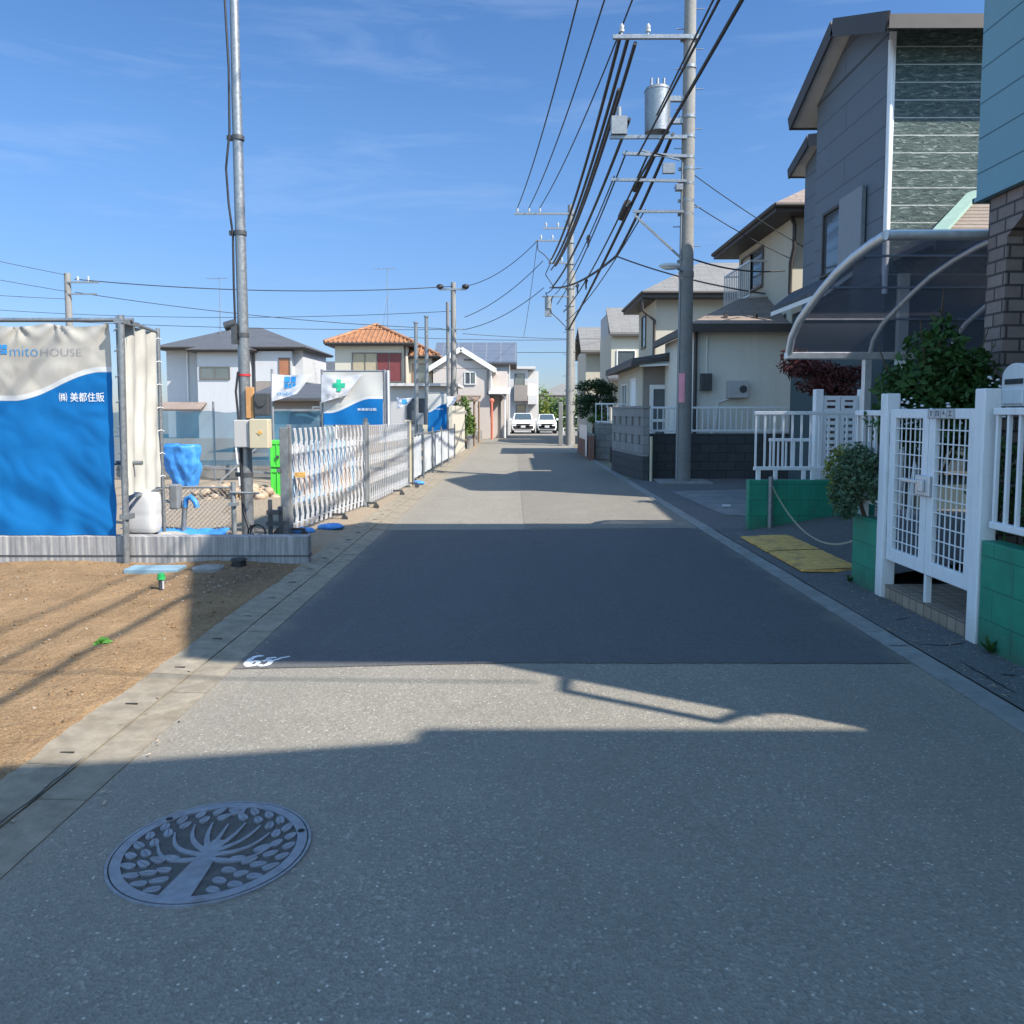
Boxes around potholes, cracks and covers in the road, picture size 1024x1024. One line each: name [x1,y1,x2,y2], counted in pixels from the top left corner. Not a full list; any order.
manhole cover [104,801,311,909]
crack [890,642,1018,693]
